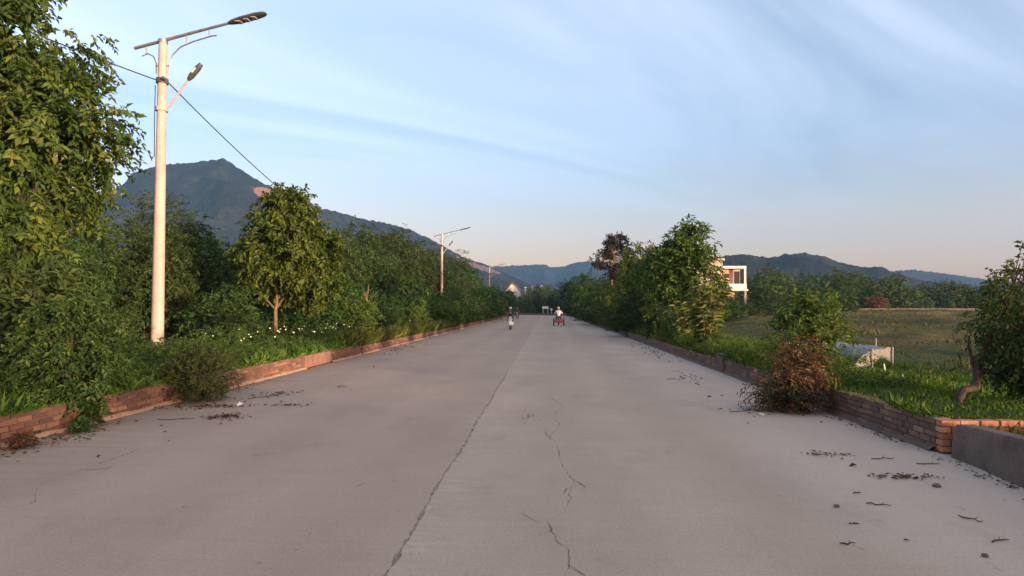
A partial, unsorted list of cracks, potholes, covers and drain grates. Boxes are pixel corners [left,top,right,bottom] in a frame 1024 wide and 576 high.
crack [5,441,179,510]
crack [522,395,585,576]
